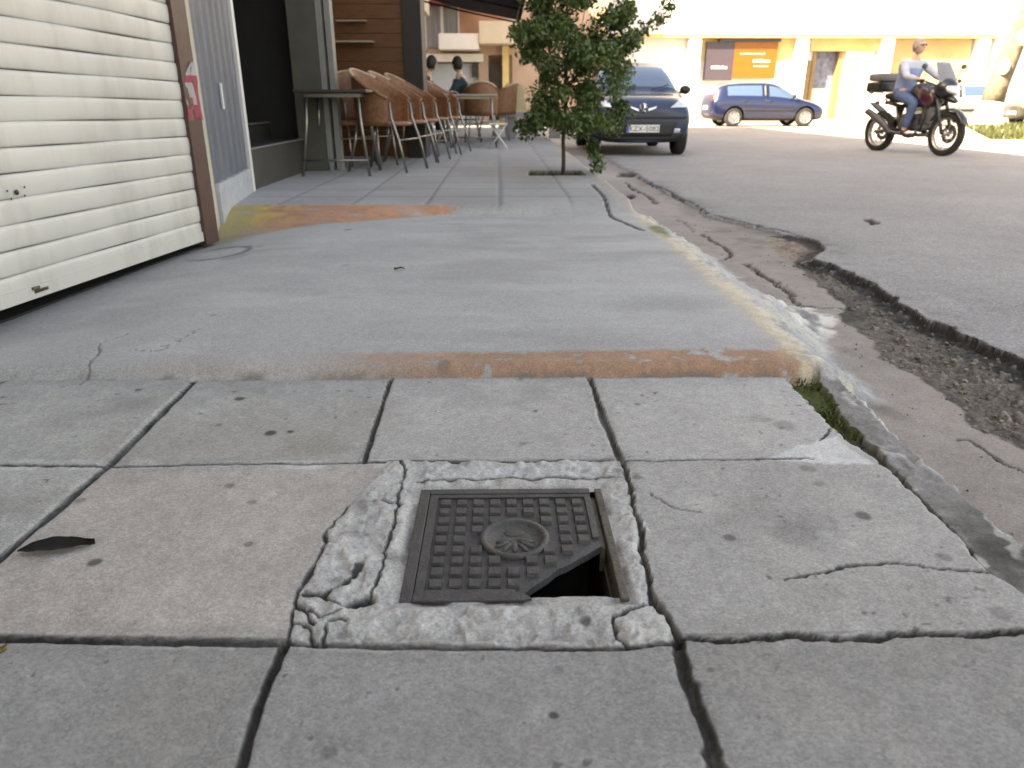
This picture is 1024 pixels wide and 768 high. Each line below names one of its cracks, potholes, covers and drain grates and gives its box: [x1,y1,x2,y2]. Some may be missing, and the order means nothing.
crack [285,460,408,652]
pothole [794,259,1024,450]
crack [79,329,200,385]
crack [610,462,702,651]
crack [784,561,990,581]
manhole cover [399,488,630,606]
pothole [765,234,826,263]
crack [623,177,845,311]
